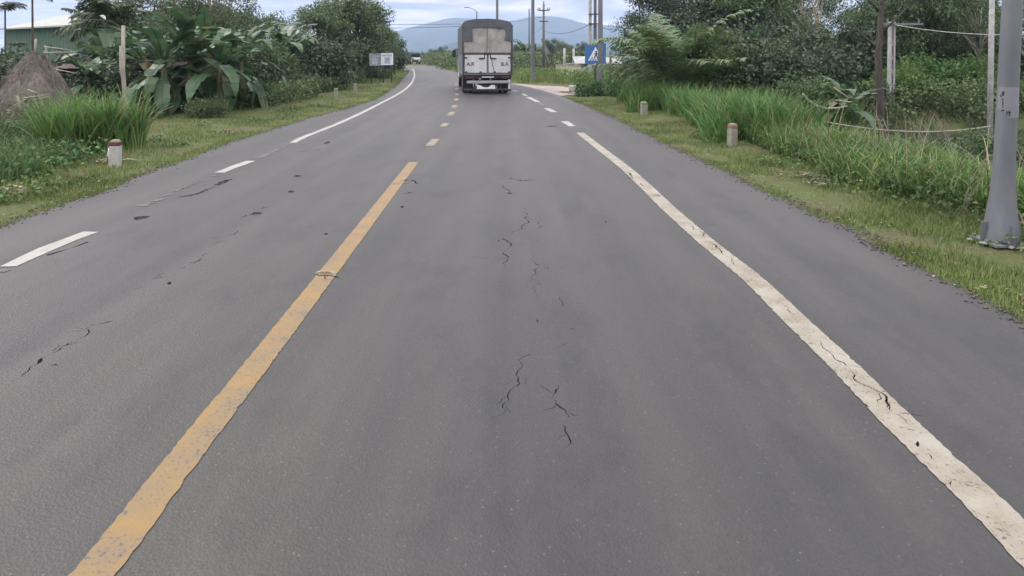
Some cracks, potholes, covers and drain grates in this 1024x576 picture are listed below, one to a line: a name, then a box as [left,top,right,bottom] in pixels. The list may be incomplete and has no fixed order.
crack [495,354,580,447]
crack [821,343,919,416]
crack [22,321,111,377]
crack [498,178,574,330]
